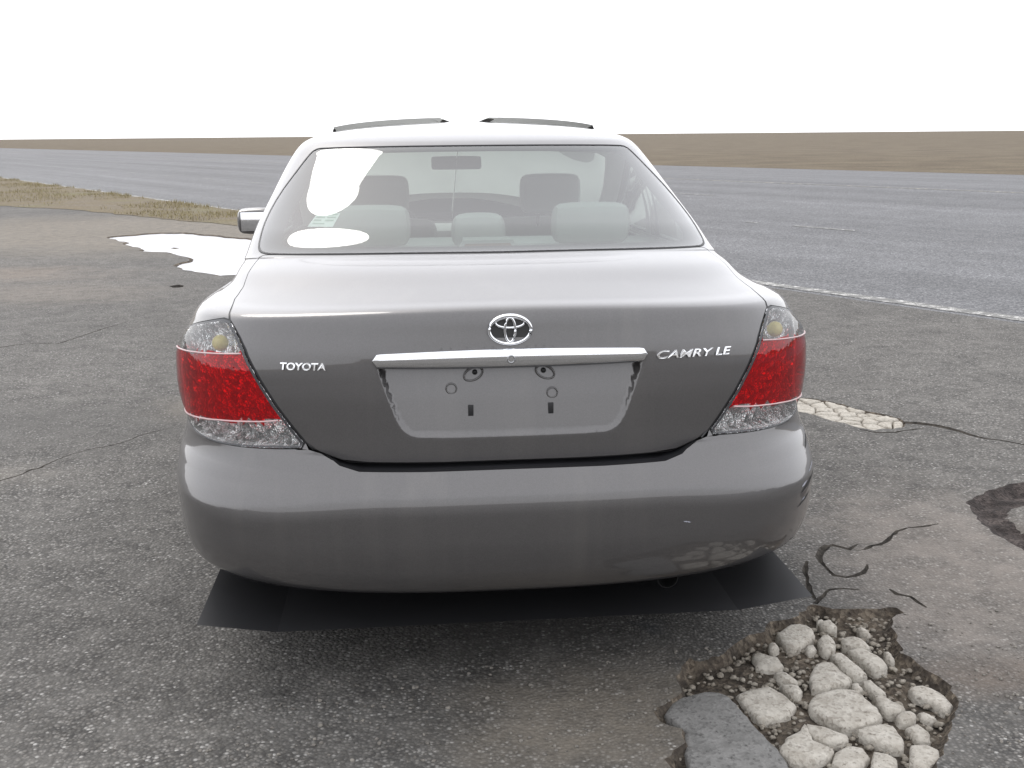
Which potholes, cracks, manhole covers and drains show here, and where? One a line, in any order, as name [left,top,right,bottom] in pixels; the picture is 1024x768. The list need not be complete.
pothole [966,482,1024,550]
crack [0,322,126,348]
crack [654,523,959,768]
crack [796,397,1024,445]
crack [0,428,170,481]
